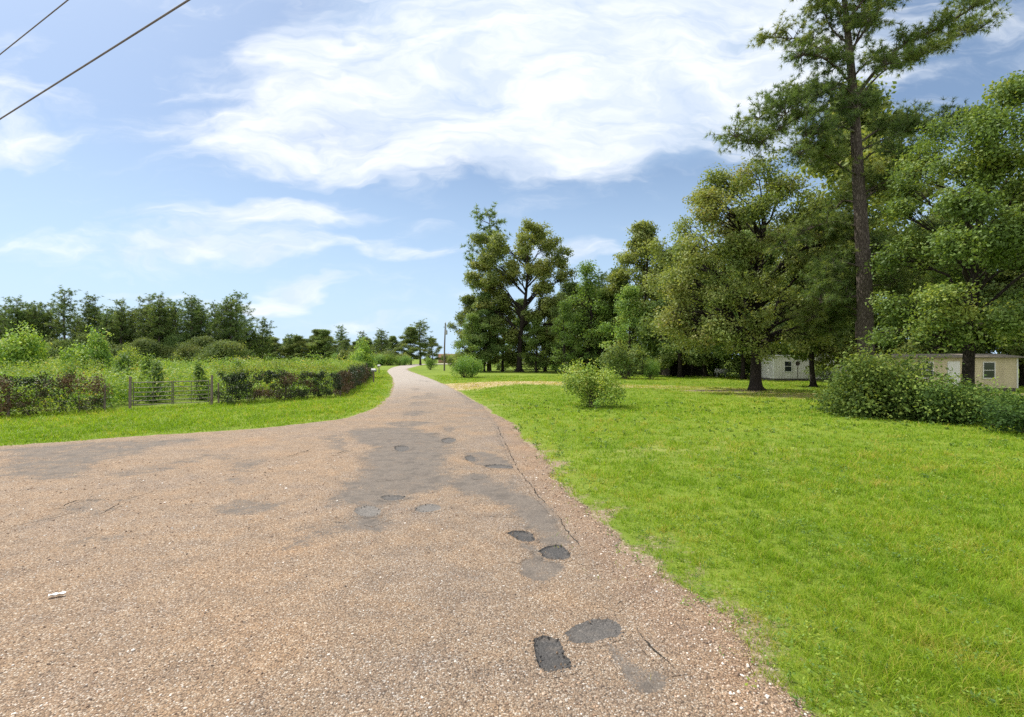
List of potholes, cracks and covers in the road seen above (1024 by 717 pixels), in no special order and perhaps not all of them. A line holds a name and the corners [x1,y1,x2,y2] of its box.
crack [472,426,602,566]
crack [604,594,690,677]
